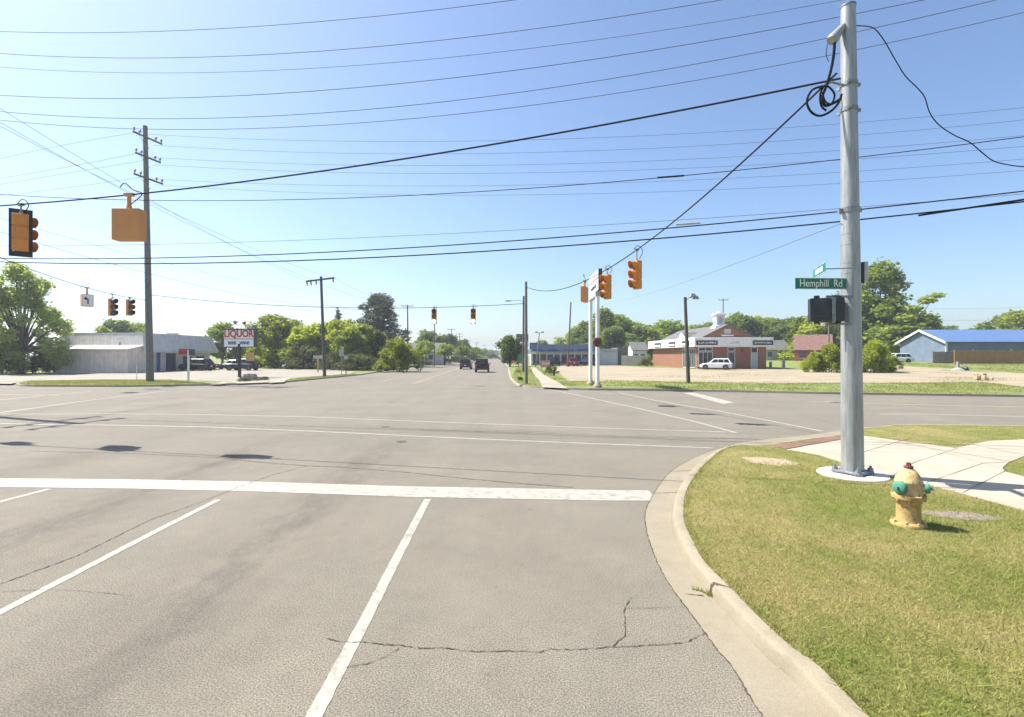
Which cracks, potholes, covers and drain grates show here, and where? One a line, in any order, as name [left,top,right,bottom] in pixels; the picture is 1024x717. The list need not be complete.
crack [326,596,705,667]
